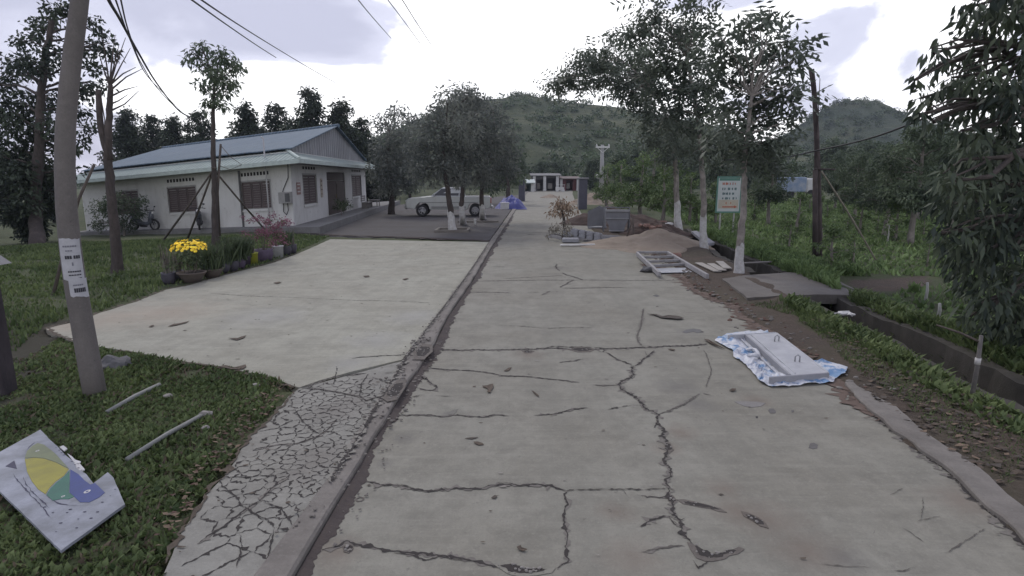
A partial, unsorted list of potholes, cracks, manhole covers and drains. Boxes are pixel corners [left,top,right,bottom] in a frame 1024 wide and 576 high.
crack [182,354,404,576]
pothole [687,542,744,562]
pothole [741,511,769,529]
crack [322,539,497,567]
crack [365,309,712,569]
